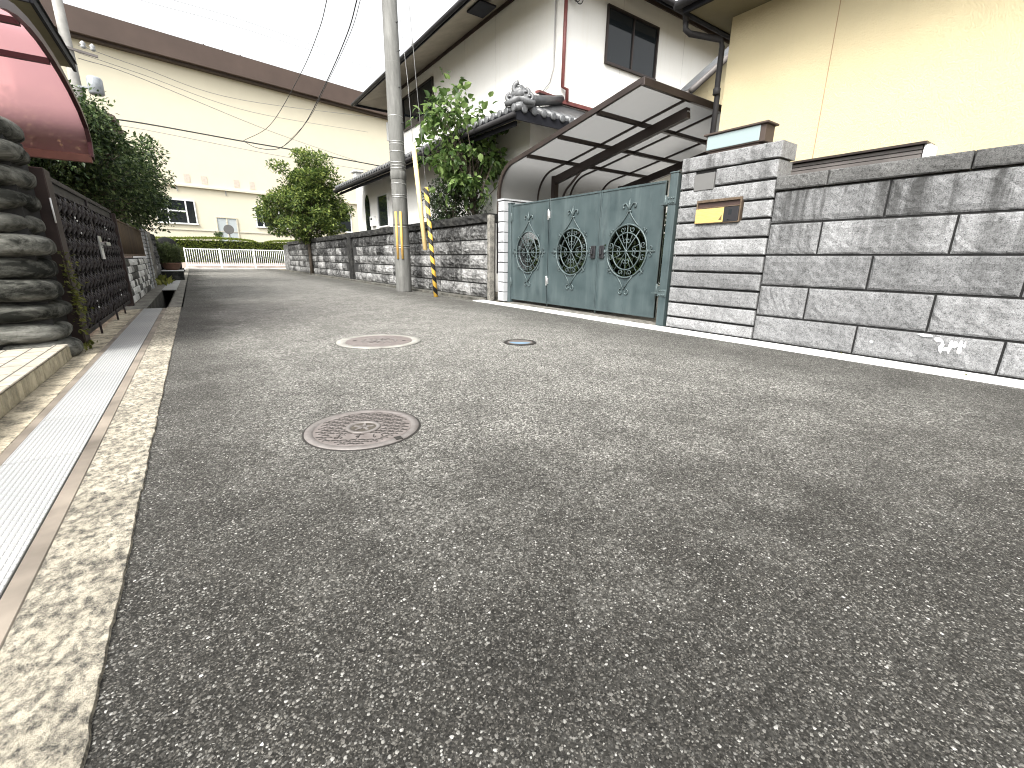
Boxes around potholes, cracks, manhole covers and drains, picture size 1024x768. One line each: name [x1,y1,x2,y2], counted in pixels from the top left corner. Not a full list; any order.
manhole cover [302,409,421,451]
manhole cover [335,334,422,349]
